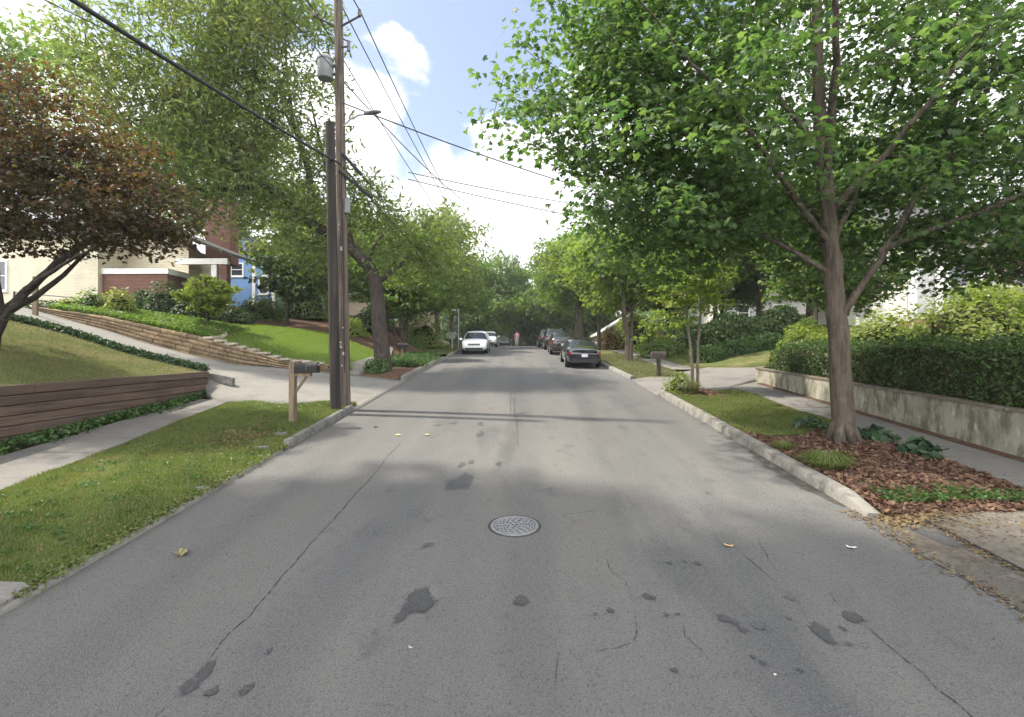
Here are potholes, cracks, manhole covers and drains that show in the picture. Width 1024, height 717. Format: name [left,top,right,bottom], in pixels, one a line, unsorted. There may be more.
manhole cover [488,515,541,537]
